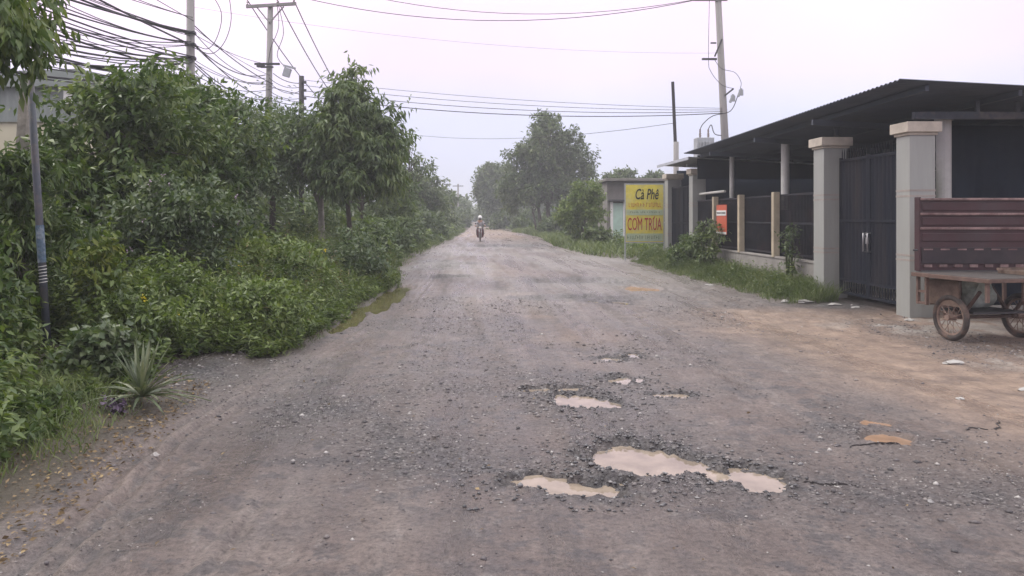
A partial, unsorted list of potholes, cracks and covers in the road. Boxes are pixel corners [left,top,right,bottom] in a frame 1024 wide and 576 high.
pothole [541,431,745,492]
pothole [578,353,637,364]
pothole [576,371,670,389]
pothole [527,384,658,418]
pothole [500,380,616,393]
pothole [460,460,680,512]
pothole [601,348,662,360]
pothole [623,386,714,403]
